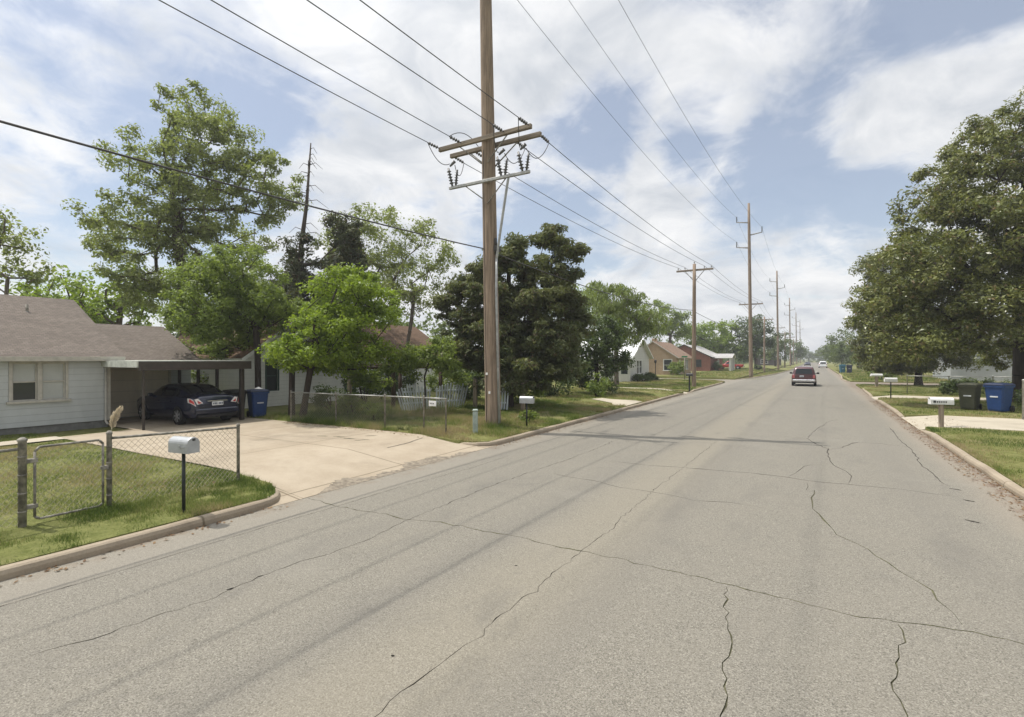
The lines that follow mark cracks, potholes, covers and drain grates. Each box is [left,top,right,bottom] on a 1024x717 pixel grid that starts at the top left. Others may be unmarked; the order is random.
crack [29,420,1023,717]
